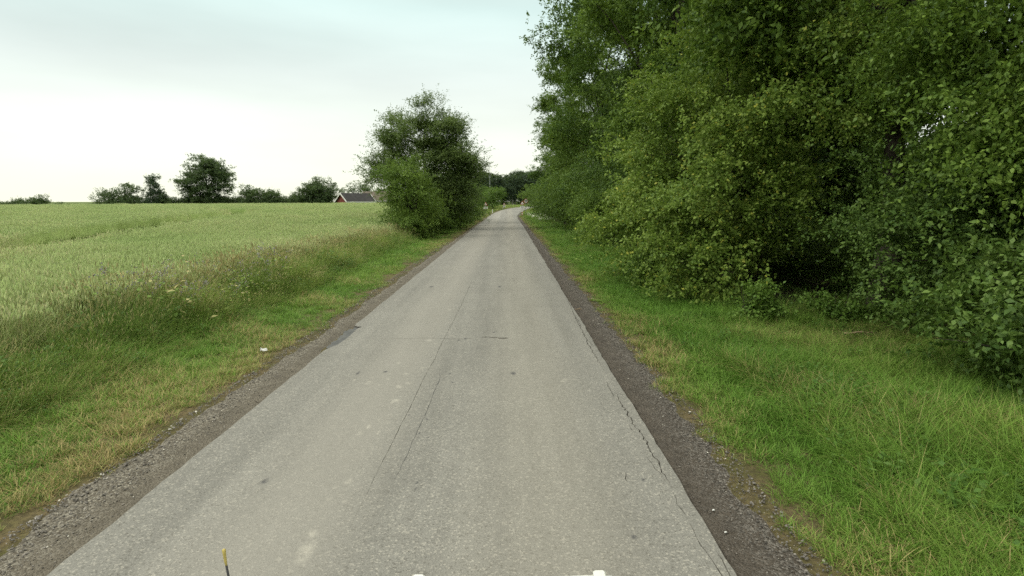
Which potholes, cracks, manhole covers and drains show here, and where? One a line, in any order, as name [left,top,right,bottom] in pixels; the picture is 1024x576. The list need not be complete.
crack [351,288,507,525]
crack [567,300,731,576]
